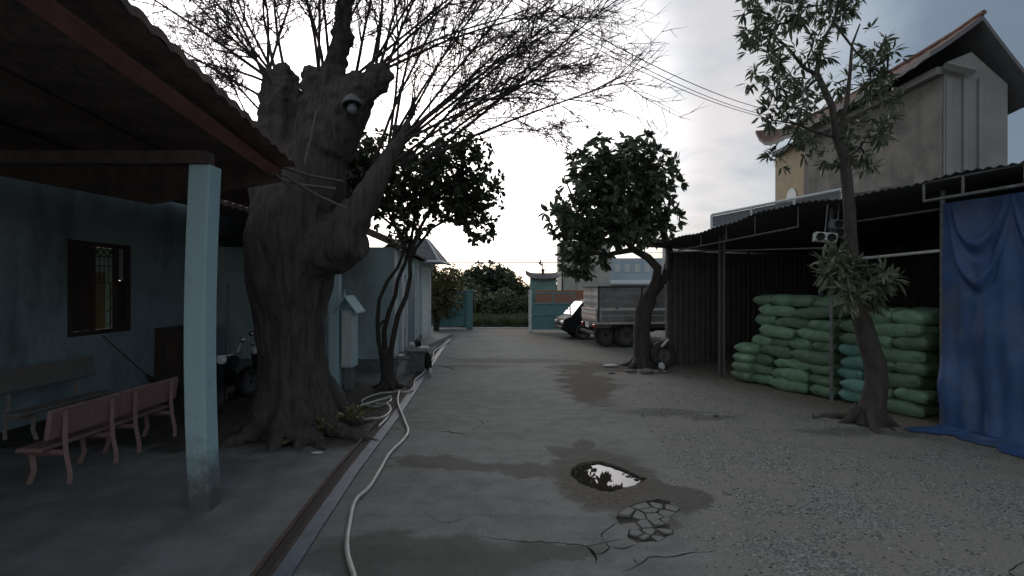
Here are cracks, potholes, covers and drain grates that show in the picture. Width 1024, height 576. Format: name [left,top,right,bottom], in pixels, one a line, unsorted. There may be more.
pothole [570,461,647,492]
crack [482,498,717,572]
